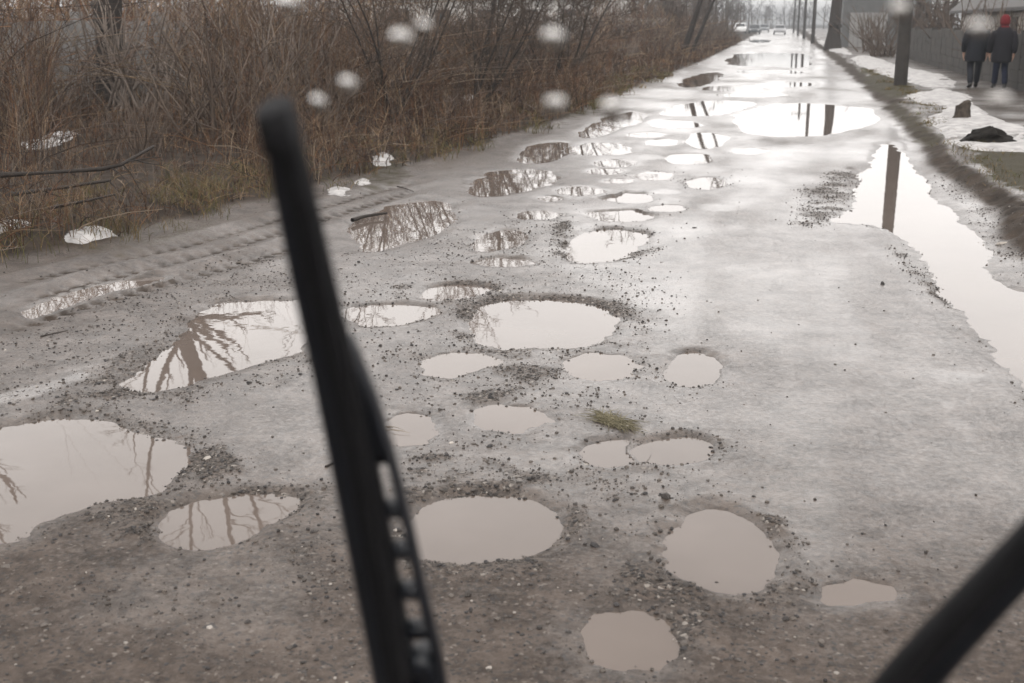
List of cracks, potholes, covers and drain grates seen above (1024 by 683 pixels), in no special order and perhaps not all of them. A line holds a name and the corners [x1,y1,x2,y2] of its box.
pothole [8,270,175,320]
pothole [636,429,727,467]
pothole [97,294,359,397]
pothole [344,299,454,328]
pothole [337,197,471,253]
pothole [391,483,580,569]
pothole [649,347,734,388]
pothole [0,406,222,553]
pothole [143,485,320,554]
pothole [546,590,704,683]
pothole [459,167,568,197]
pothole [545,347,653,384]
